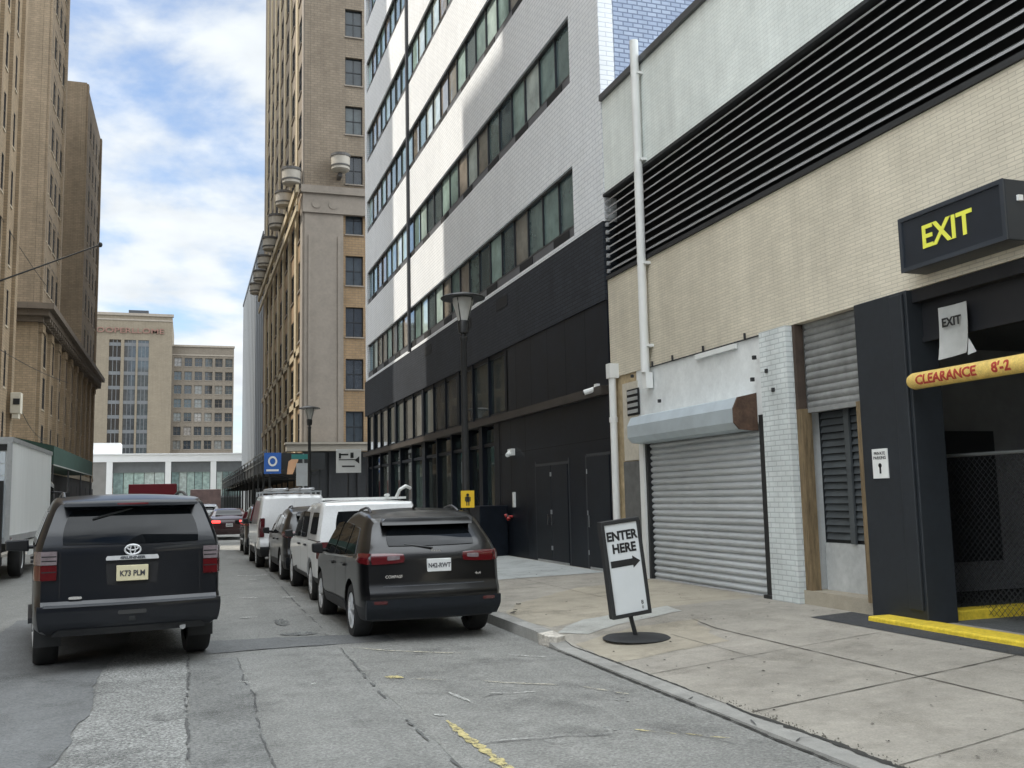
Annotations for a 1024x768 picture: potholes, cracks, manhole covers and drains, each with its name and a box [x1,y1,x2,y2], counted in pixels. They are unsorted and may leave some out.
crack [238,637,342,768]
